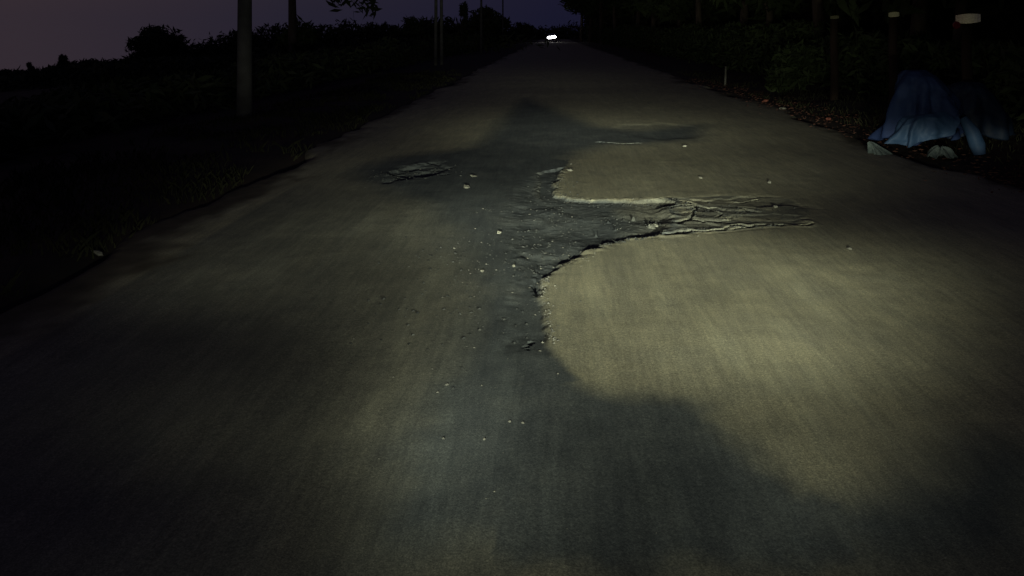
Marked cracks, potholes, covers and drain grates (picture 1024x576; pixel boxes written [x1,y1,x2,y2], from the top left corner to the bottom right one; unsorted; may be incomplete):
pothole [378,160,460,187]
pothole [490,166,678,298]
crack [660,199,816,235]
